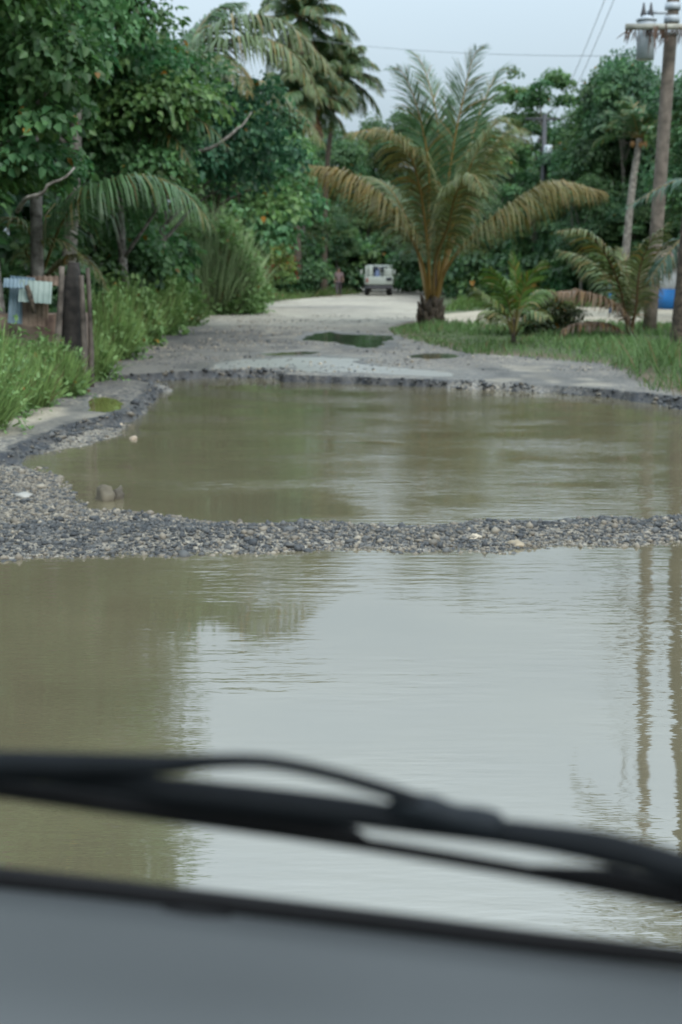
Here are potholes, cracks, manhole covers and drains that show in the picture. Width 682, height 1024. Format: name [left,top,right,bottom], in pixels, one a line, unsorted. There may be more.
pothole [0,529,682,969]
pothole [0,370,682,529]
pothole [300,331,398,348]
